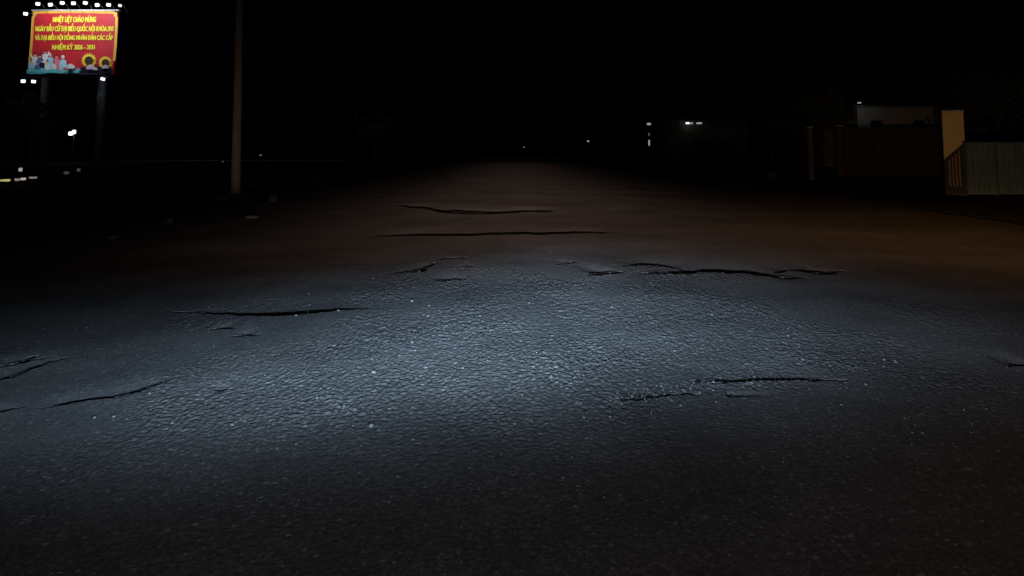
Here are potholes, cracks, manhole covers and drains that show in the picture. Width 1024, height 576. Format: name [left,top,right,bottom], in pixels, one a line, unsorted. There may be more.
crack [171,308,364,337]
crack [0,356,65,380]
crack [564,261,843,279]
crack [400,205,552,214]
crack [617,379,843,401]
crack [396,257,469,281]
